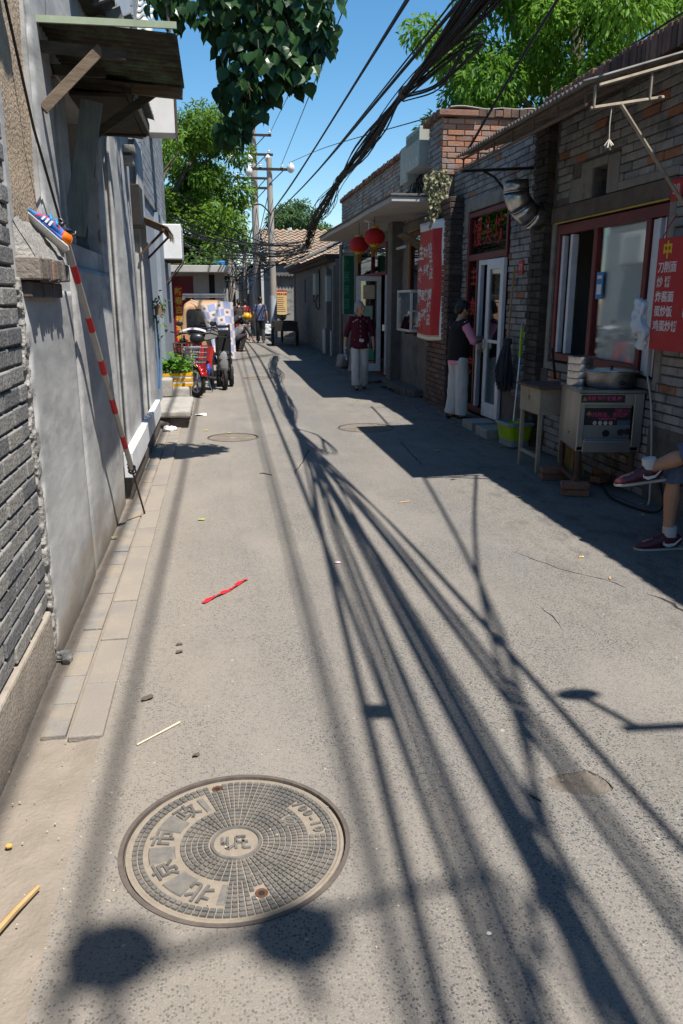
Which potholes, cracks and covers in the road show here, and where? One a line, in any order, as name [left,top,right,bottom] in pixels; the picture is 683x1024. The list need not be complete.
manhole cover [207,433,259,442]
manhole cover [118,774,350,928]
crack [649,594,683,612]
manhole cover [338,423,395,432]
crack [515,552,623,587]
